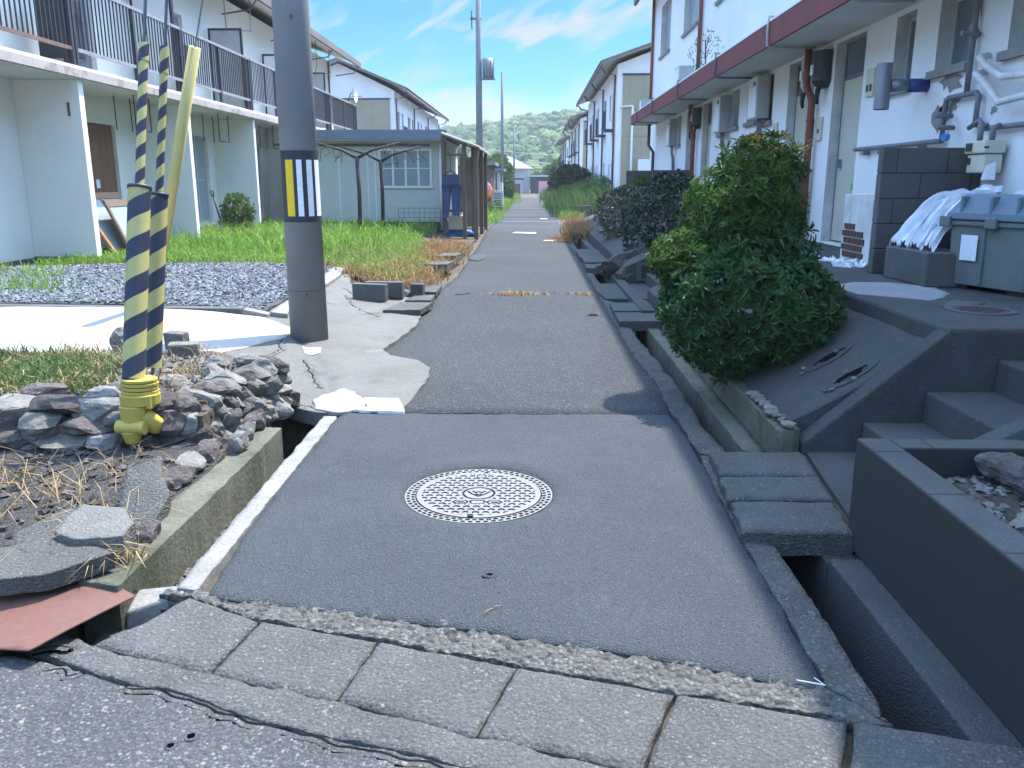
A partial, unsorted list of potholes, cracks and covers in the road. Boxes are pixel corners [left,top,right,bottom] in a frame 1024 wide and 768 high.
manhole cover [944,305,1018,316]
pothole [824,359,879,390]
crack [123,686,459,768]
pothole [803,343,854,372]
crack [267,338,323,411]
manhole cover [405,469,552,524]
crack [340,288,378,317]
